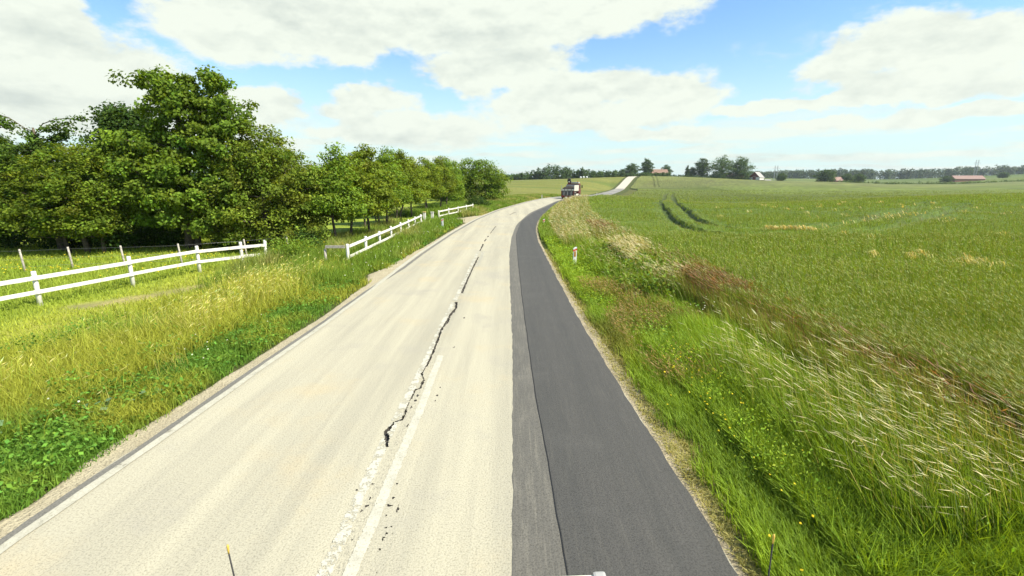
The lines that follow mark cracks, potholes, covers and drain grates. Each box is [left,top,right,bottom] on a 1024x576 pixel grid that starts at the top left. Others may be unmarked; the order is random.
crack [384,213,513,447]
